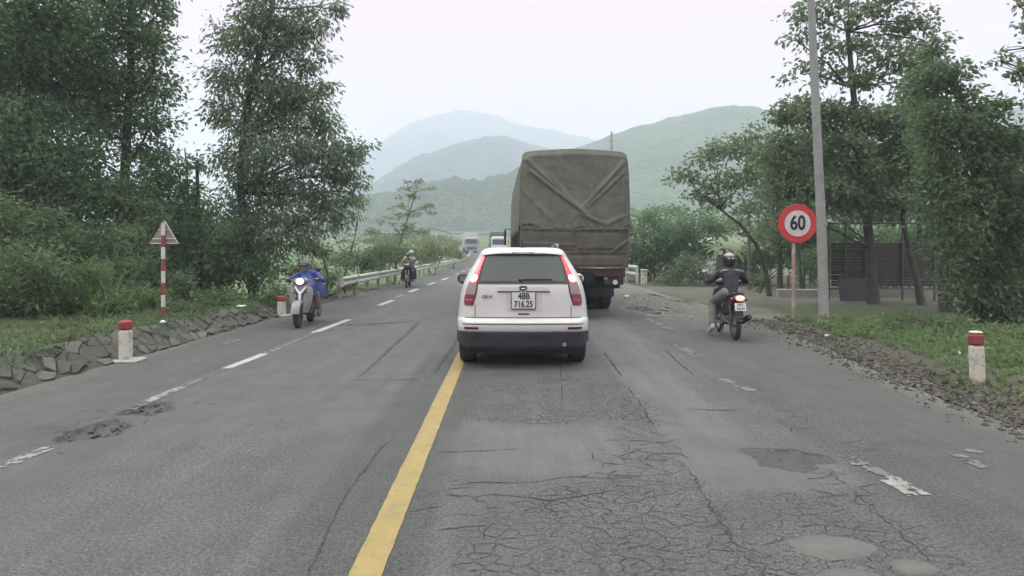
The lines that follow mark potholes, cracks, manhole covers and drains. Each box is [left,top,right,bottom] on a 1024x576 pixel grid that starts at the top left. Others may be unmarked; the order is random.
pothole [47,418,137,445]
crack [307,436,397,576]
pothole [111,401,176,417]
crack [411,353,975,576]
